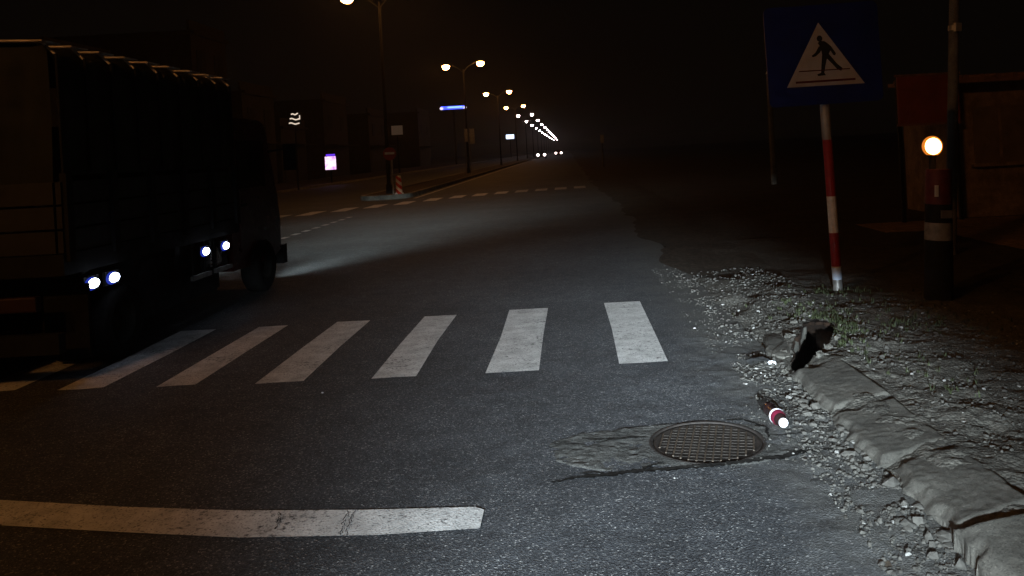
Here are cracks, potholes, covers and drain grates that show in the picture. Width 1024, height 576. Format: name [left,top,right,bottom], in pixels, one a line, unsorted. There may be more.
crack [551,419,834,483]
pothole [780,319,841,374]
manhole cover [649,421,767,464]
